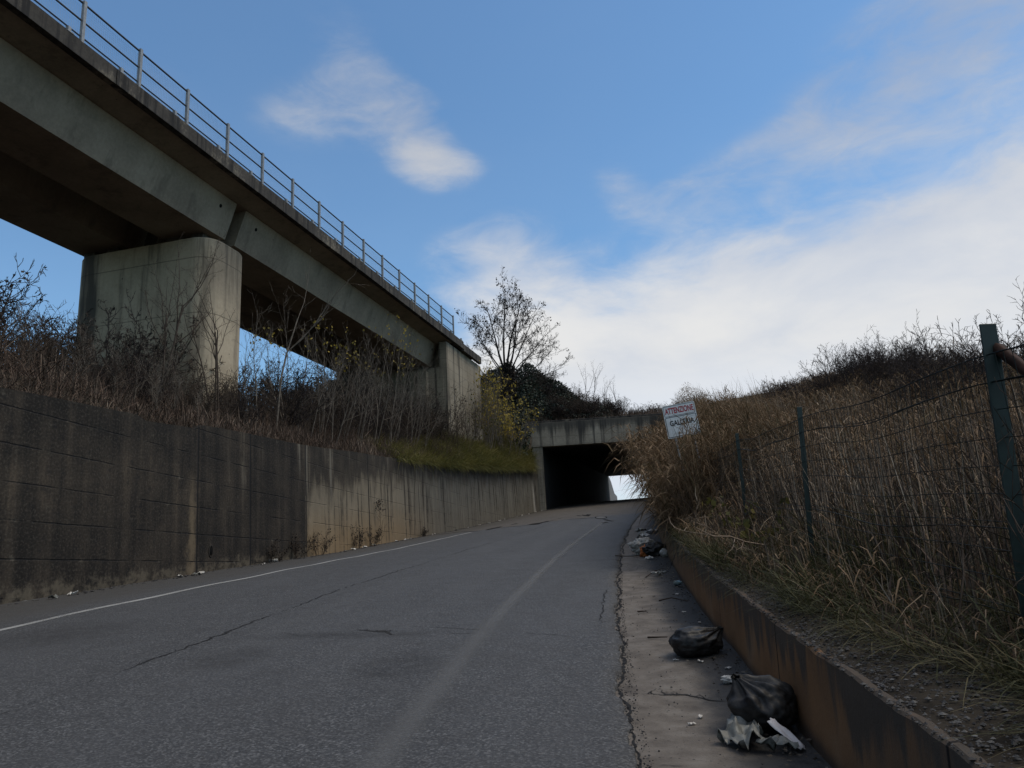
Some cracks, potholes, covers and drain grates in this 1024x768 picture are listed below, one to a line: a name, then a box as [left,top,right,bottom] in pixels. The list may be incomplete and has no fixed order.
crack [118,614,314,672]
